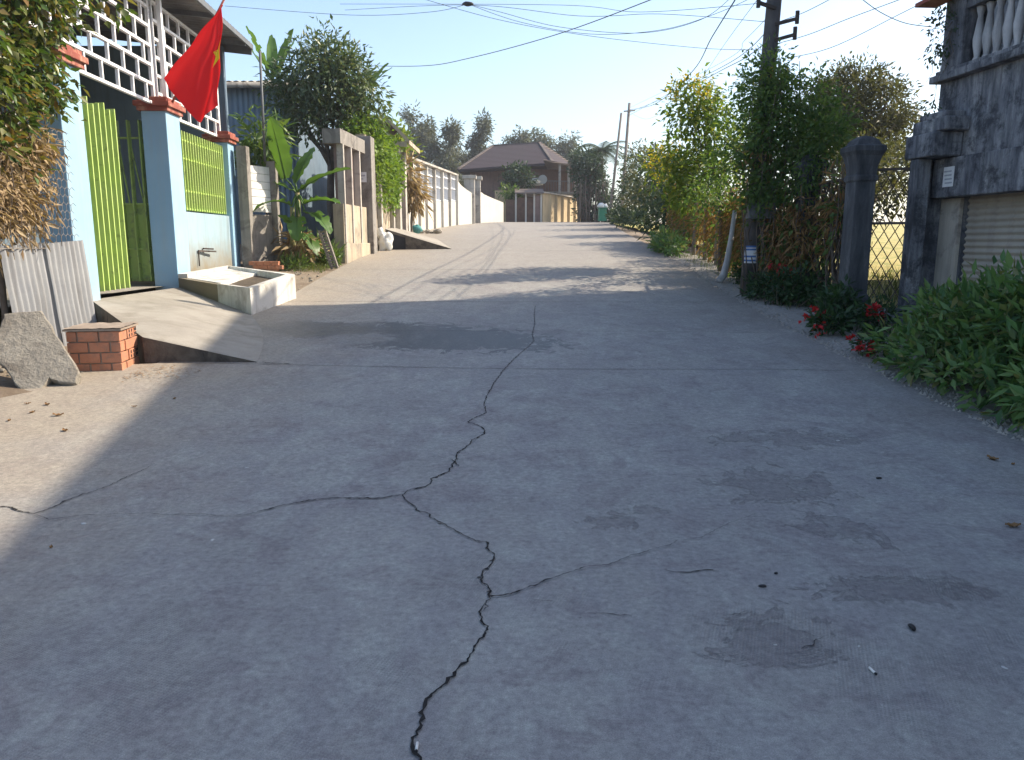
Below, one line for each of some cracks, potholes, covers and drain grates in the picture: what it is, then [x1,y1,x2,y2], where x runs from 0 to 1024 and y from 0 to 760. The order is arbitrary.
crack [0,306,748,760]
